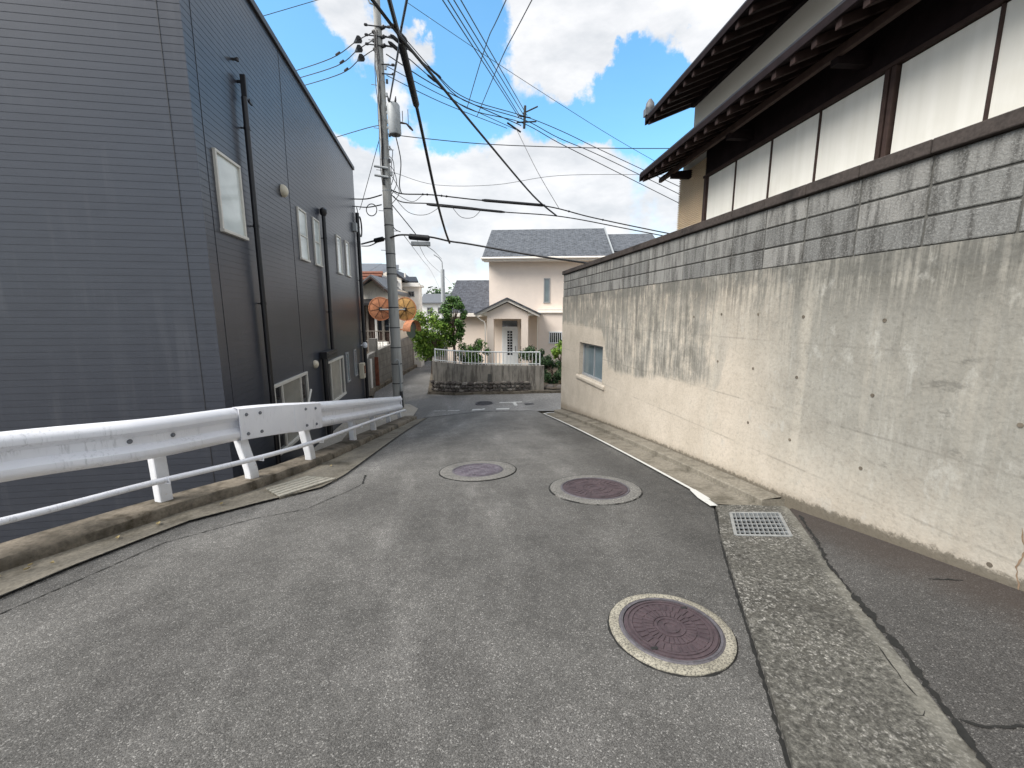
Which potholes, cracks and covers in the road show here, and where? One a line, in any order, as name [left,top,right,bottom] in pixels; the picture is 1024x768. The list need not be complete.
manhole cover [607,593,739,677]
manhole cover [549,475,643,505]
drain grate [729,512,793,537]
manhole cover [439,460,517,482]
